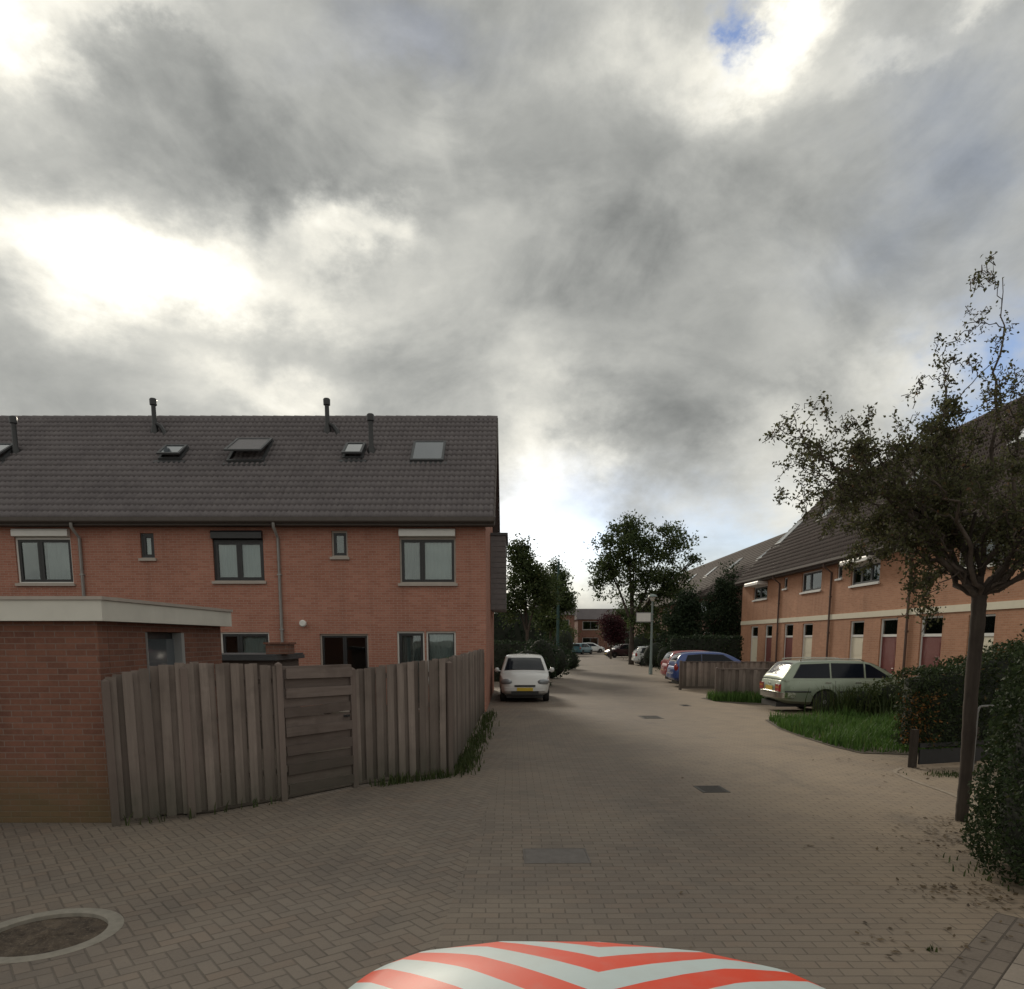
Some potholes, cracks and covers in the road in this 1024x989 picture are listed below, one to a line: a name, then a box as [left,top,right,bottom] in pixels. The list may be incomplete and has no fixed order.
manhole cover [523,848,591,864]
